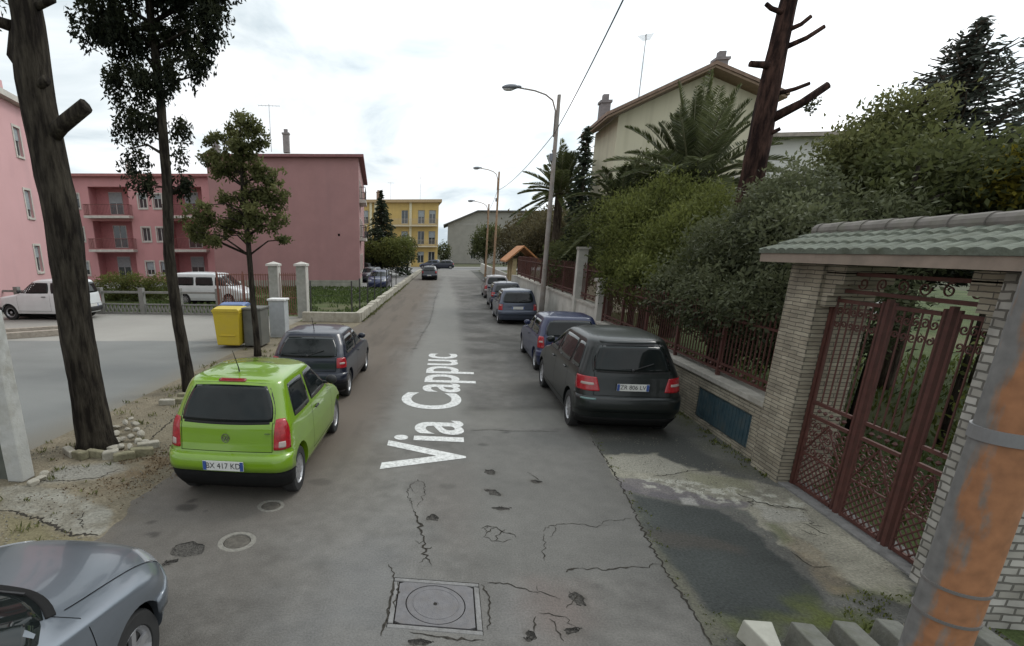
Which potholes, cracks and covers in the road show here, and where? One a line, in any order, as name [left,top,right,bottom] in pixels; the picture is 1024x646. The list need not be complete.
crack [0,510,97,537]
crack [542,518,630,558]
pothole [568,592,587,606]
manhole cover [217,532,257,552]
crack [738,493,829,535]
pothole [170,541,205,557]
crack [406,479,431,564]
manhole cover [387,578,483,635]
crack [381,564,586,641]
crack [566,563,653,572]
manhole cover [257,499,285,512]
